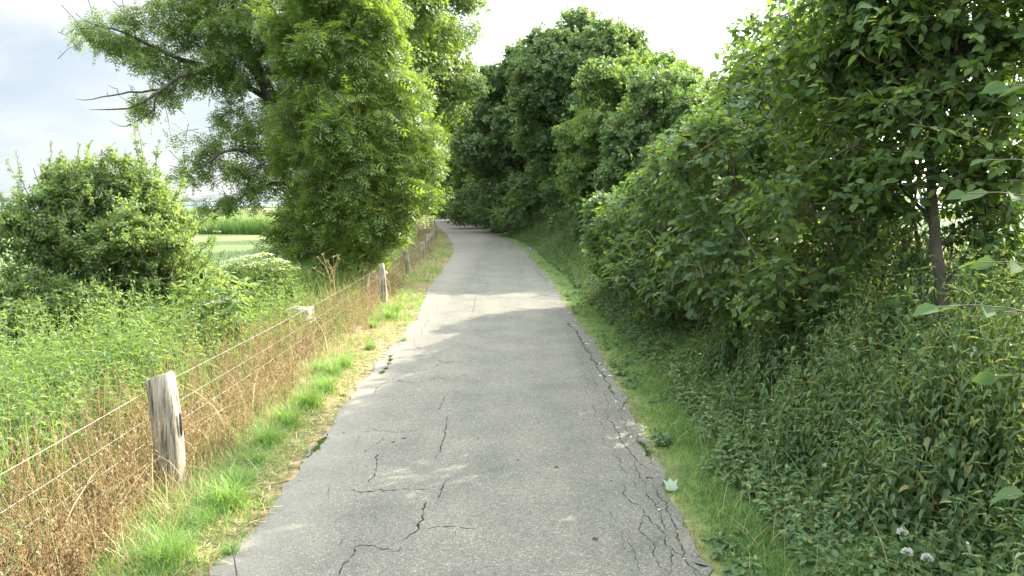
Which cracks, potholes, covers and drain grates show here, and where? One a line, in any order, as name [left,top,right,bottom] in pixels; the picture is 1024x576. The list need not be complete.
crack [339,415,470,576]
crack [567,323,701,576]
crack [373,300,483,460]
